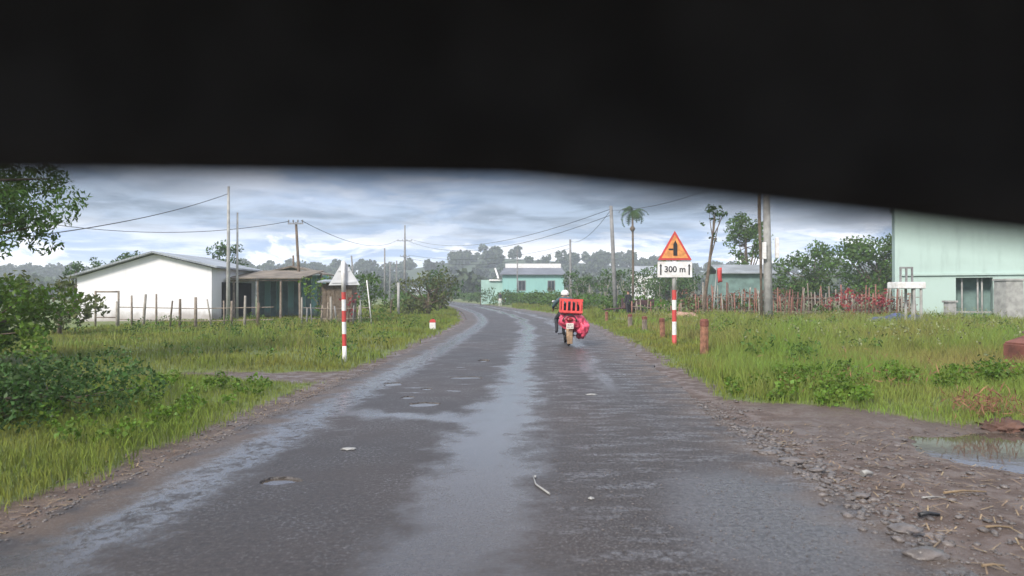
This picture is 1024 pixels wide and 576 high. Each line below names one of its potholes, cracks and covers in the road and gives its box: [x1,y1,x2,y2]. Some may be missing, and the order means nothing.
pothole [259,477,303,485]
